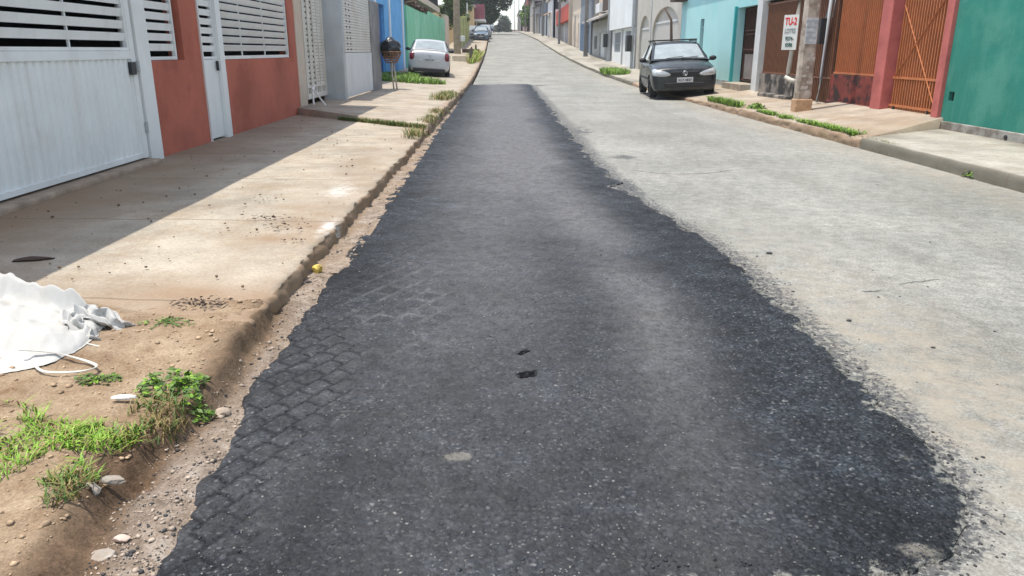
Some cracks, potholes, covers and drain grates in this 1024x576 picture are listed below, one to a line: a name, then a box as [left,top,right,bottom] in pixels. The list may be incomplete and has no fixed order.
pothole [516,370,537,378]
